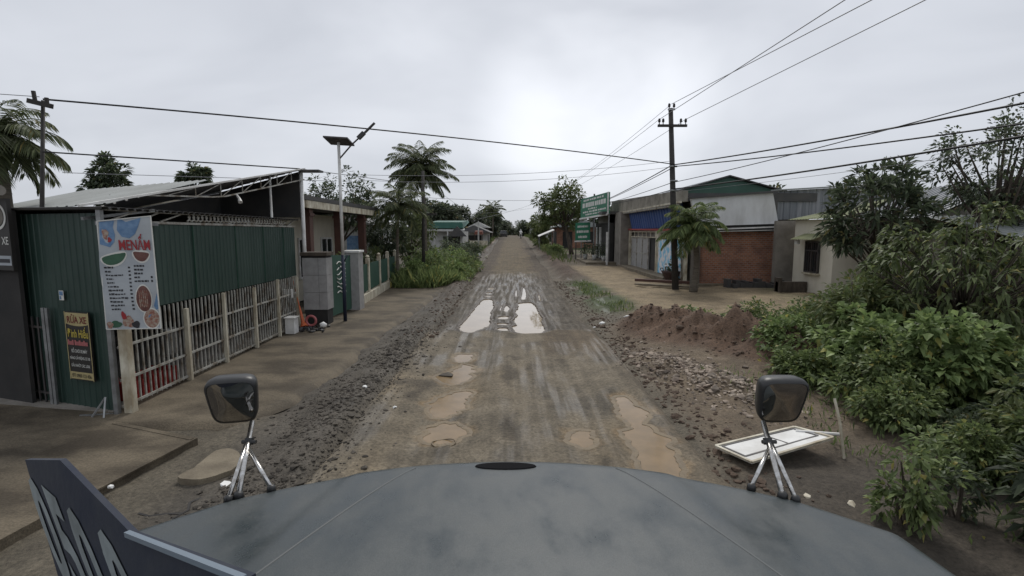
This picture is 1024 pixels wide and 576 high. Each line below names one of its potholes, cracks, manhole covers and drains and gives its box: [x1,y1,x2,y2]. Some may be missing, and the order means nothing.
pothole [432,363,480,386]
pothole [423,389,477,420]
pothole [417,421,473,447]
pothole [450,353,477,363]
pothole [456,298,497,333]
pothole [562,428,600,450]
pothole [610,395,690,478]
pothole [509,302,548,334]
